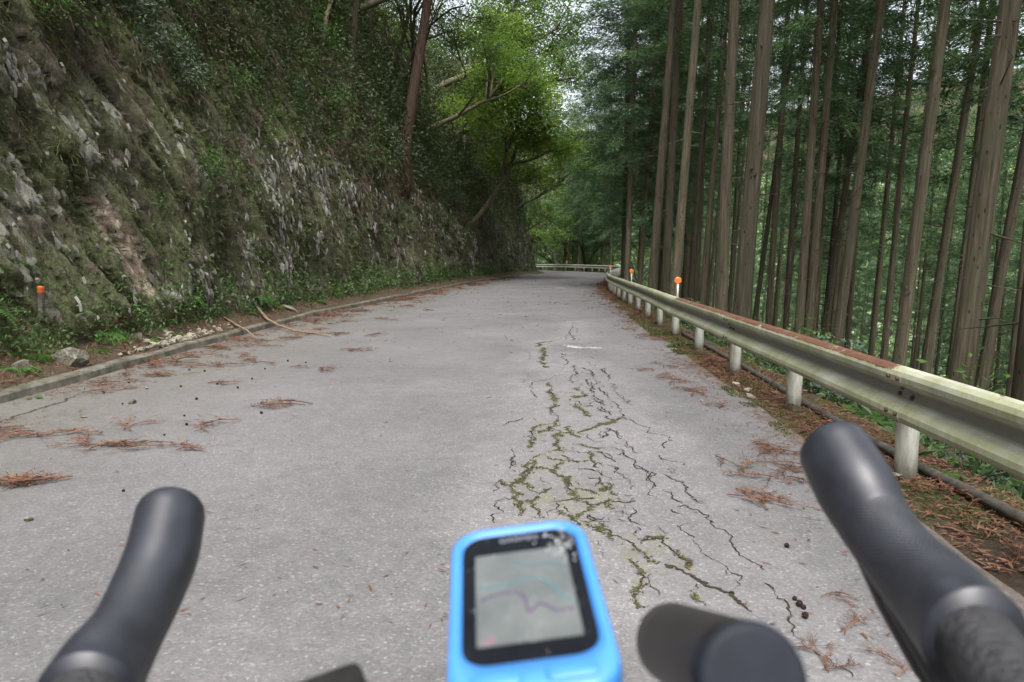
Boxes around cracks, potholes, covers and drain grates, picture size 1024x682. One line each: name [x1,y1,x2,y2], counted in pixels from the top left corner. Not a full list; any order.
crack [490,322,854,677]
